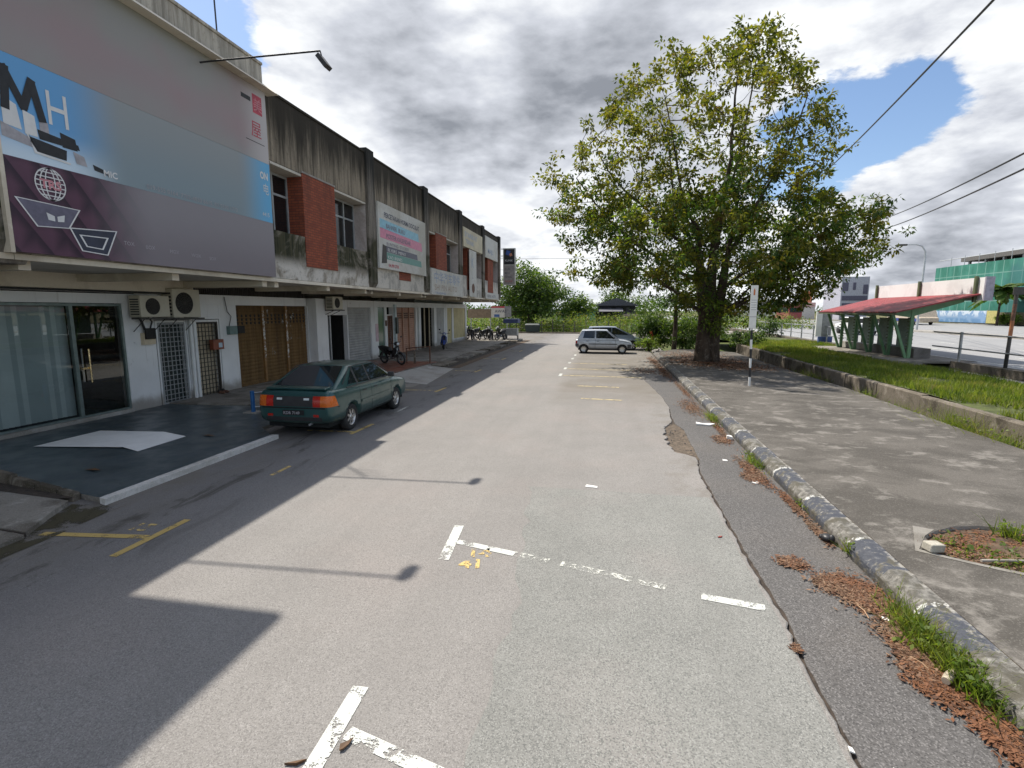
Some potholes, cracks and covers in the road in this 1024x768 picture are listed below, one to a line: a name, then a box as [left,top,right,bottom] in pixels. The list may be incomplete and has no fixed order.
pothole [664,424,700,460]
